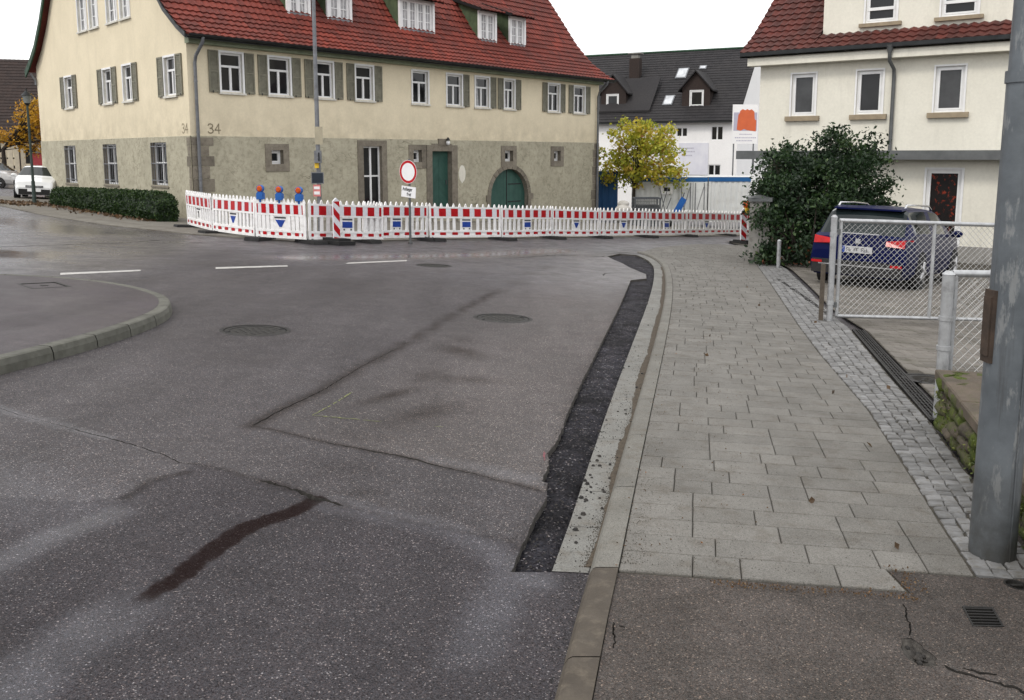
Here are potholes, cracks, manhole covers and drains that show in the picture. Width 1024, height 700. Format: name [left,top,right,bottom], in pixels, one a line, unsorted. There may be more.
pothole [901,639,937,667]
manhole cover [219,324,291,336]
crack [944,665,1024,694]
manhole cover [473,313,533,323]
drain grate [962,606,1004,627]
